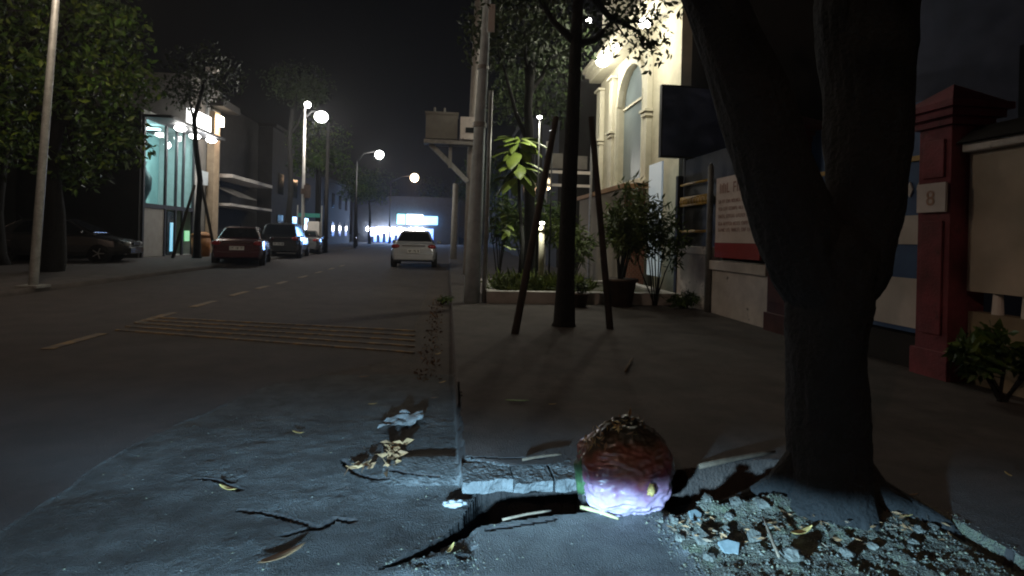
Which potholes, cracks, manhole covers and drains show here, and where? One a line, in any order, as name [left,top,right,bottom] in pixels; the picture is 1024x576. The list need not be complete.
crack [196,477,358,537]
crack [484,517,558,532]
crack [340,459,440,481]
